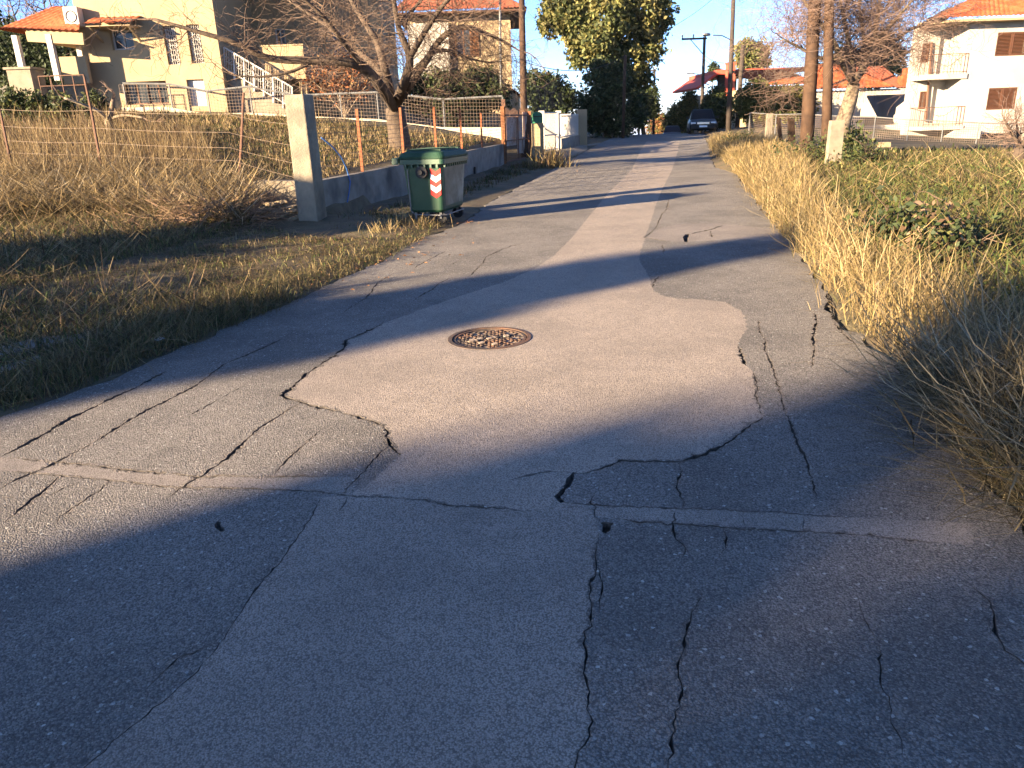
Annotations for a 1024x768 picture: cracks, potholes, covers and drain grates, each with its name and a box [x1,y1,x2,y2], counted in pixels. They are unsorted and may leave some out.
pothole [554,472,576,503]
crack [972,586,1024,664]
crack [1,325,524,768]
crack [512,321,939,768]
crack [342,244,520,314]
manhole cover [448,327,531,350]
